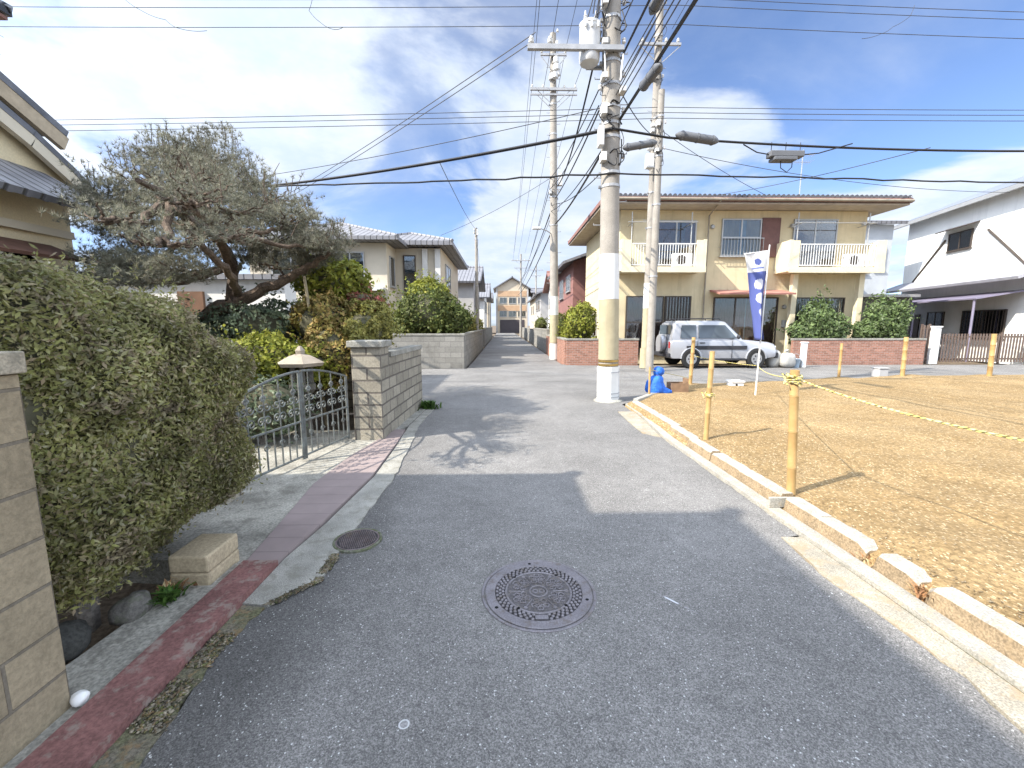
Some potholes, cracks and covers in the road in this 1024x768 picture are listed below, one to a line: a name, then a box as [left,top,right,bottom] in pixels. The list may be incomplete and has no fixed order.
manhole cover [332,528,382,554]
manhole cover [481,560,596,633]
